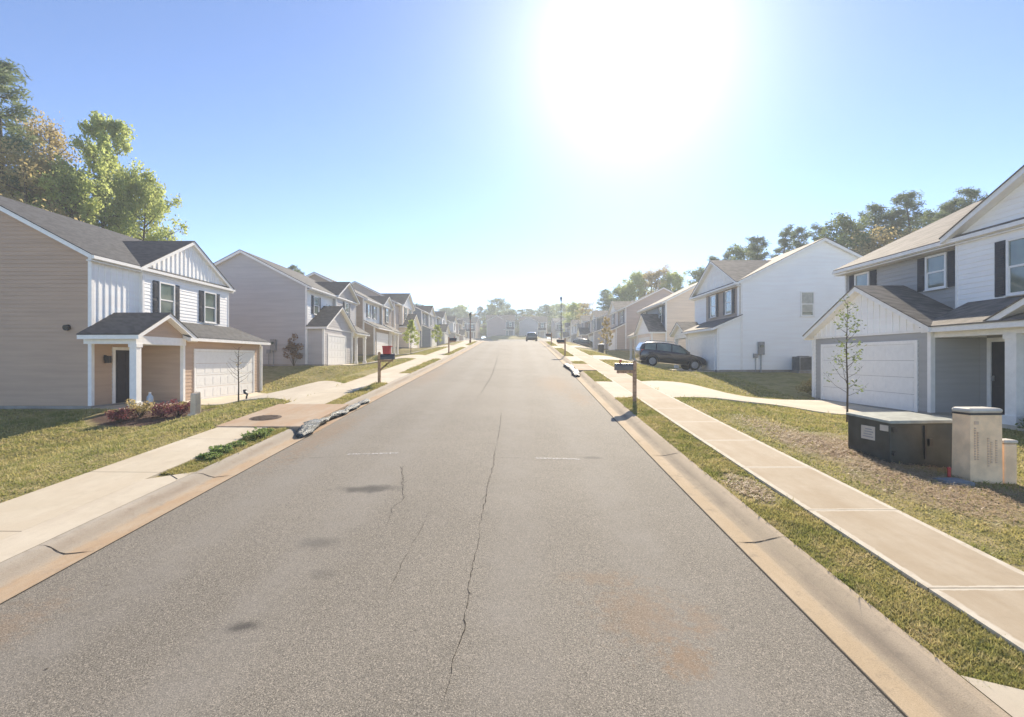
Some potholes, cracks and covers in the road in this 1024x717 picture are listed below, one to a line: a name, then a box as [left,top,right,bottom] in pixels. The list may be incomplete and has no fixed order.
crack [443,414,502,706]
